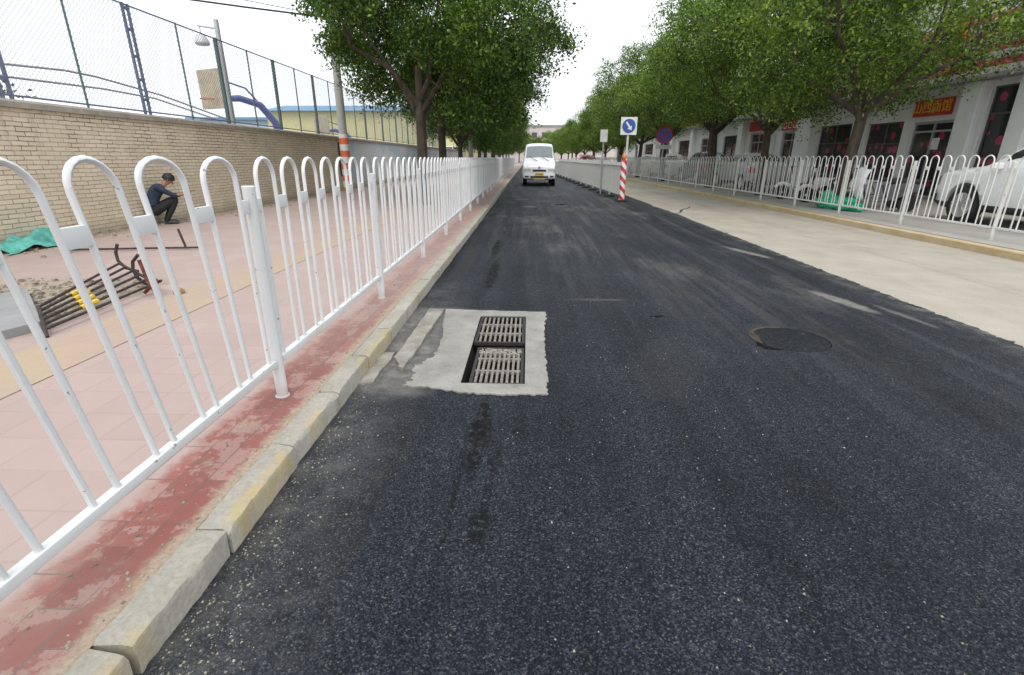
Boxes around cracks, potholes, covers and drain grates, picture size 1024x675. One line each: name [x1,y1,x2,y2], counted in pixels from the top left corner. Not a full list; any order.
drain grate [474,316,525,346]
drain grate [469,347,524,384]
manhole cover [748,326,831,352]
